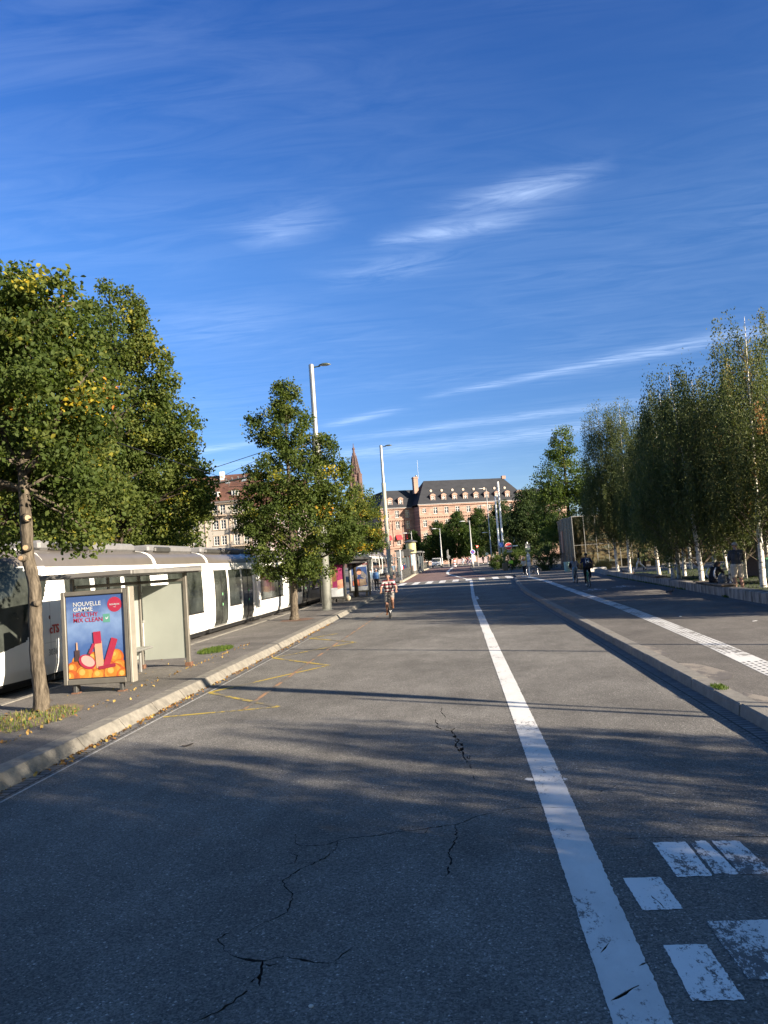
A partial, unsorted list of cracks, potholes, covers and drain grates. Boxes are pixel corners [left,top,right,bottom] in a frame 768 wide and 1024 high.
crack [435,708,475,779]
crack [193,930,350,1023]
crack [248,807,543,933]
